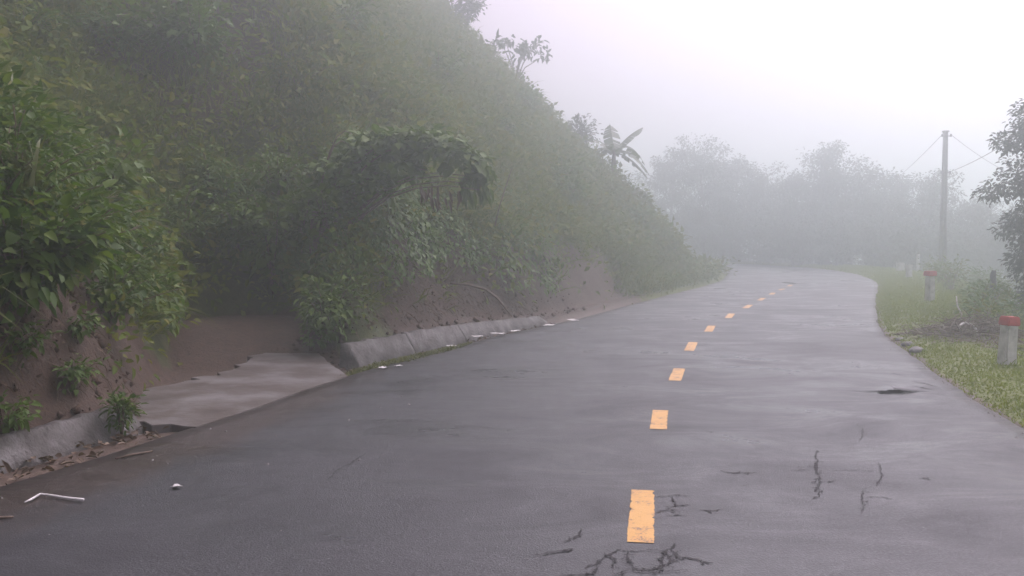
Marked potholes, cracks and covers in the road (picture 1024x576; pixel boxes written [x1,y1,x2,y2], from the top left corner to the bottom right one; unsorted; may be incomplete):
crack [657,494,720,516]
crack [535,528,713,576]
crack [796,450,887,511]
